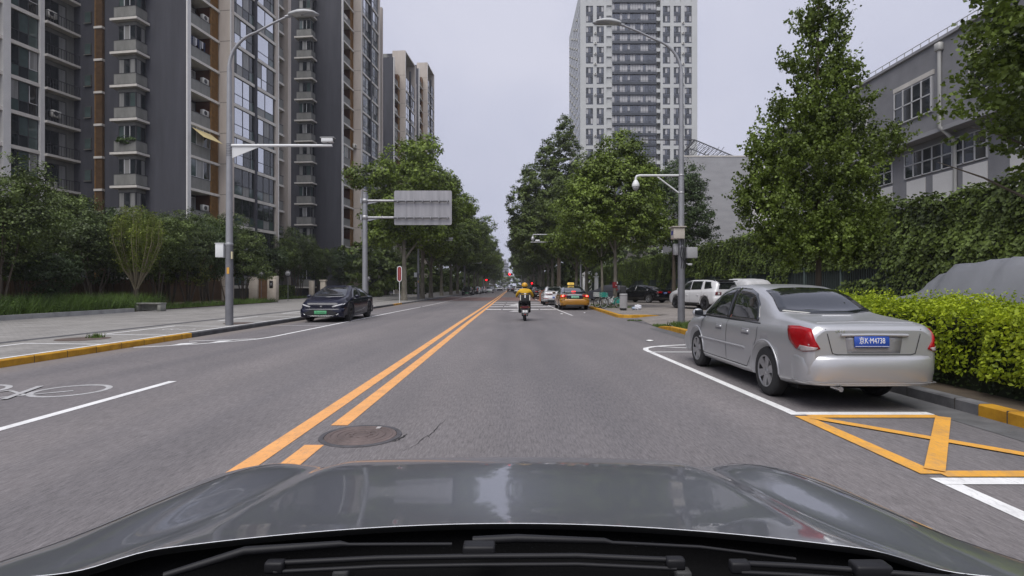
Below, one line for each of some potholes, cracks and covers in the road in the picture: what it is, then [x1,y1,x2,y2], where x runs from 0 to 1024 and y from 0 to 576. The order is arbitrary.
manhole cover [318,425,402,448]
